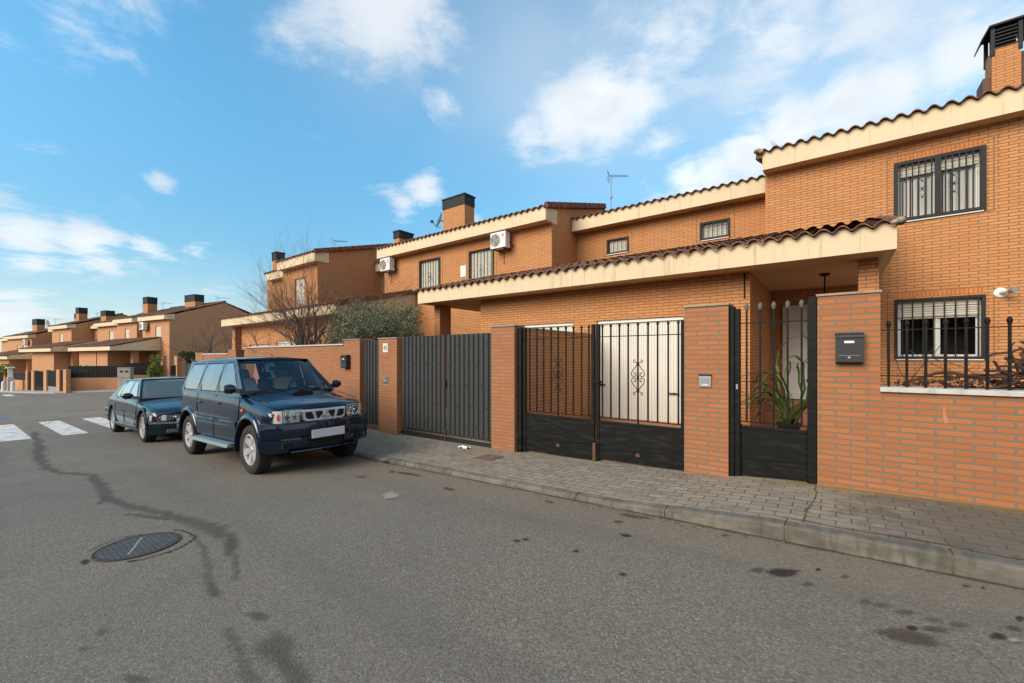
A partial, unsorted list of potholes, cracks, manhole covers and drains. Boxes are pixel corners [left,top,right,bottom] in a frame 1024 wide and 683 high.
manhole cover [91,532,181,562]
